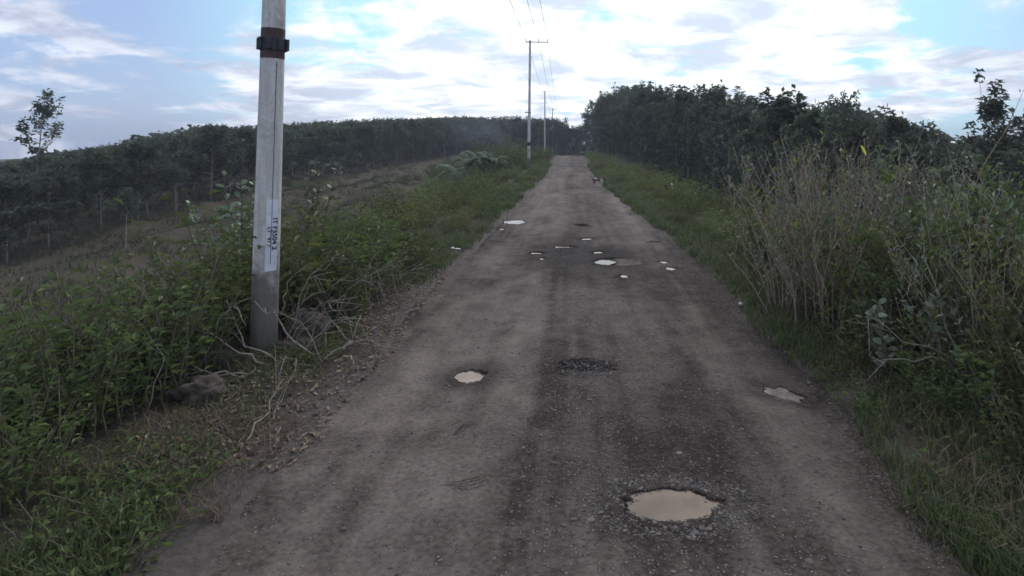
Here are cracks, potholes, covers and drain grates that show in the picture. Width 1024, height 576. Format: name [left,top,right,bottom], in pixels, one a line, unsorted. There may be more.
pothole [599,481,748,532]
pothole [750,382,819,408]
pothole [539,355,630,378]
pothole [445,366,497,387]
pothole [583,256,654,268]
